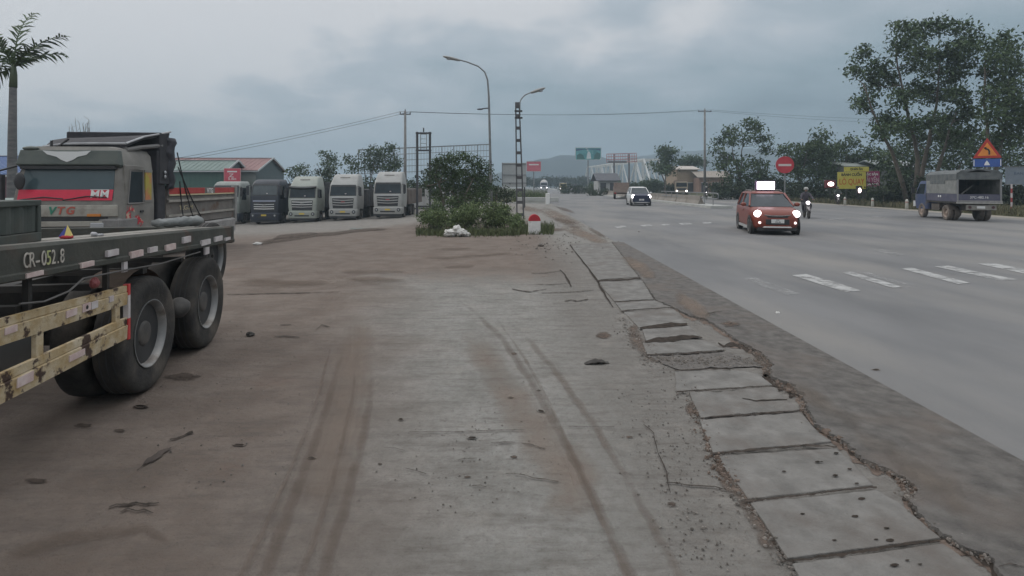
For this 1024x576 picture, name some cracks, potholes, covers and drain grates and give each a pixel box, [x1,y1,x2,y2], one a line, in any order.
crack [109,502,159,513]
crack [718,342,1024,576]
crack [644,424,726,493]
crack [514,270,589,301]
